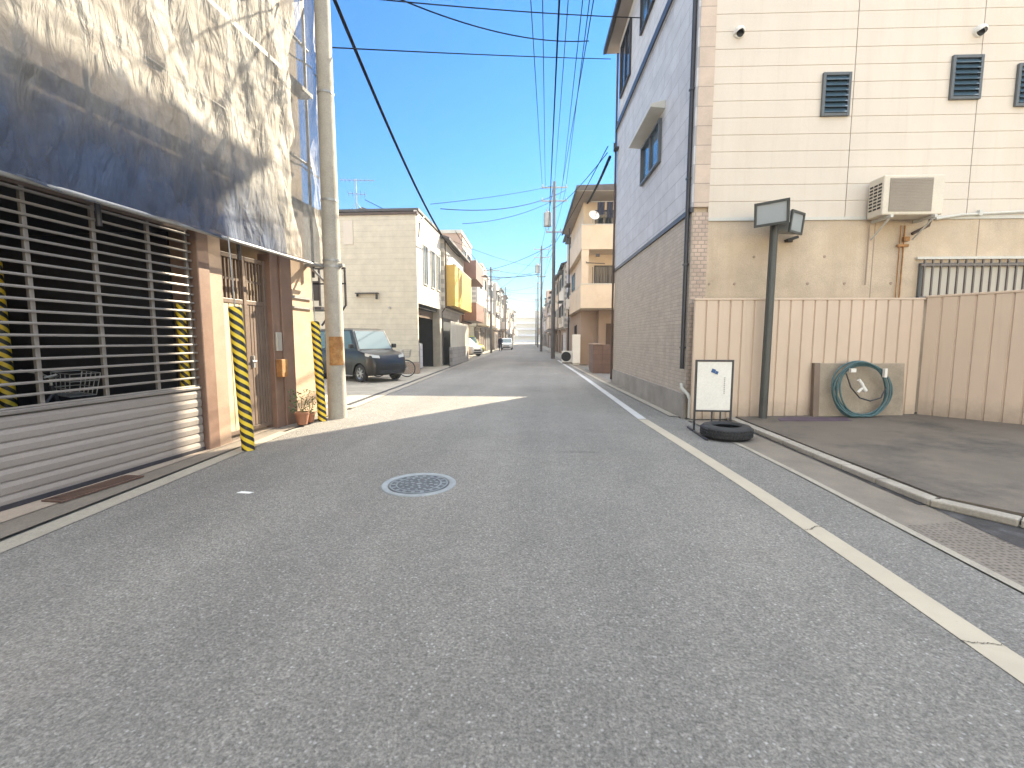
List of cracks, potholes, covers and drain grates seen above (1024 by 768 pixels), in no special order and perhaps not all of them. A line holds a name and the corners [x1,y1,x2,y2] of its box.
manhole cover [381,473,456,497]
drain grate [41,475,144,503]
